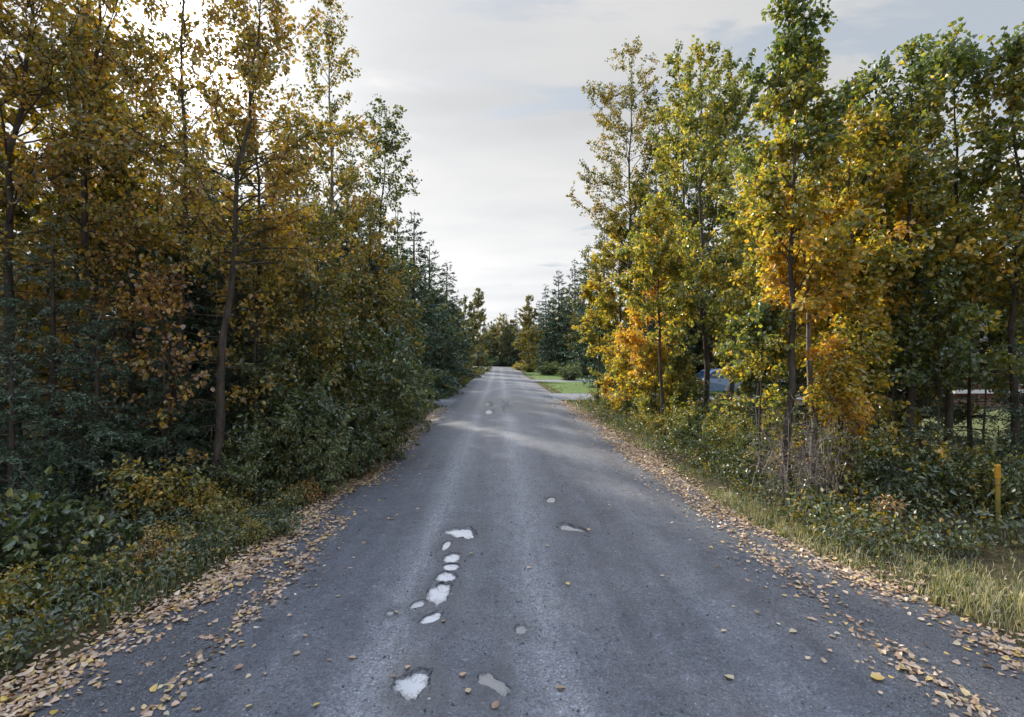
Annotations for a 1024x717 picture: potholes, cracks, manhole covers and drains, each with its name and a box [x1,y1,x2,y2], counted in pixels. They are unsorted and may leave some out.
pothole [424,581,453,607]
pothole [514,623,529,634]
pothole [434,570,459,583]
pothole [442,552,462,564]
pothole [417,609,444,624]
pothole [442,562,461,571]
pothole [441,526,479,540]
pothole [556,522,589,533]
pothole [476,671,512,697]
pothole [390,666,433,701]
pothole [409,599,427,608]
